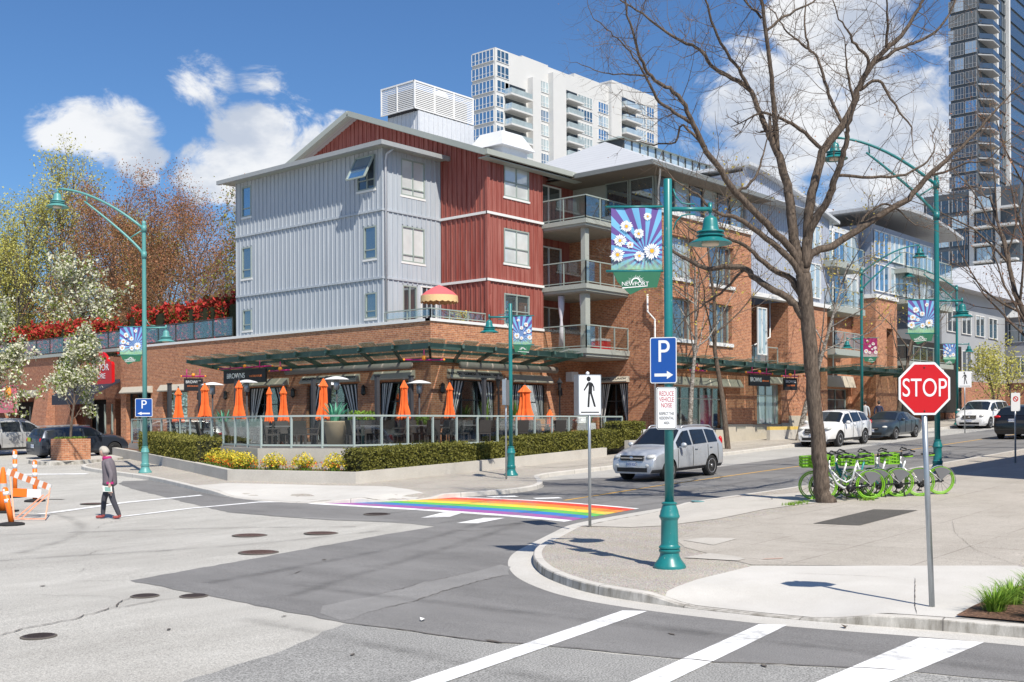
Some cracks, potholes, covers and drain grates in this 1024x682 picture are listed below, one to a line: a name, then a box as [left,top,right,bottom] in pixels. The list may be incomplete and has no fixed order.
crack [1,547,171,635]
manhole cover [20,632,57,640]
